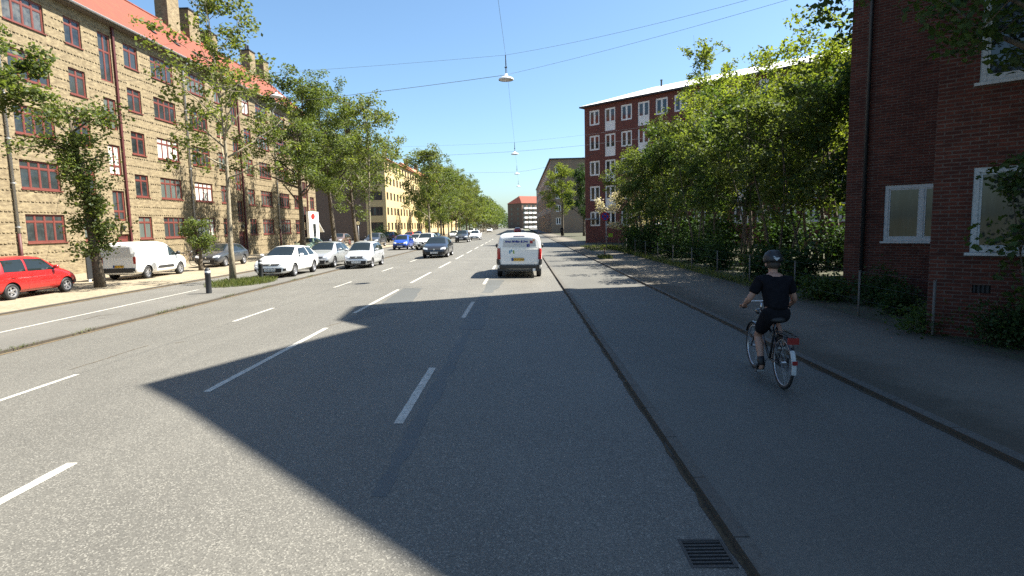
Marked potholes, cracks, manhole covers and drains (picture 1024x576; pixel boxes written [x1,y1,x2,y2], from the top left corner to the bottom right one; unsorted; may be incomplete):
drain grate [677,538,739,568]
